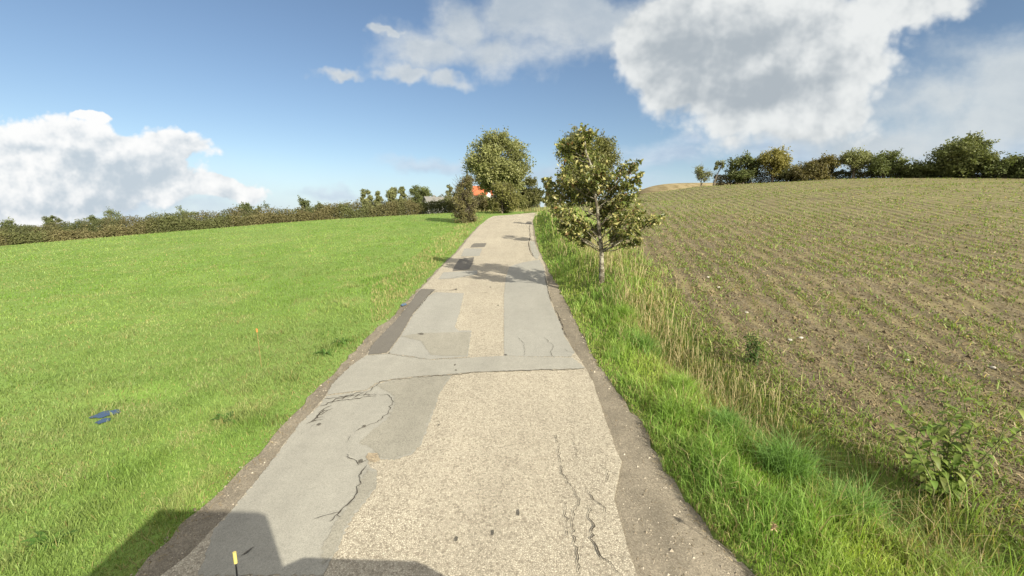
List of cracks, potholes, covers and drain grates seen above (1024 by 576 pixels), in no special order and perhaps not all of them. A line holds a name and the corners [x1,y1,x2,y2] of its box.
crack [303,379,394,521]
crack [557,441,619,573]
